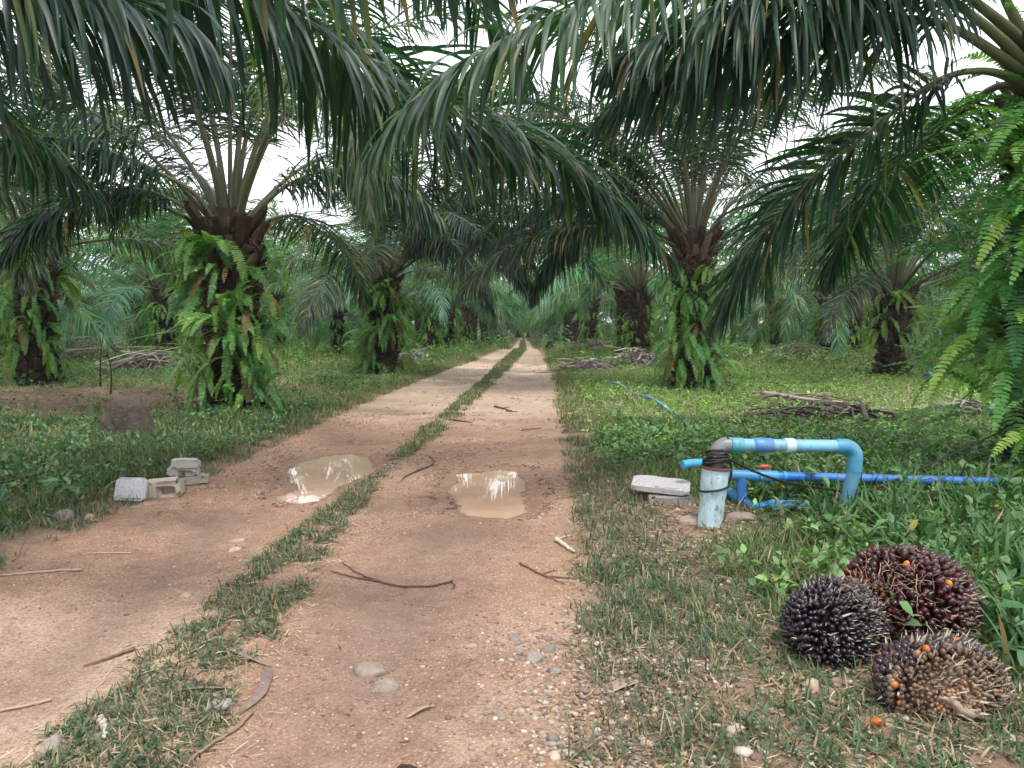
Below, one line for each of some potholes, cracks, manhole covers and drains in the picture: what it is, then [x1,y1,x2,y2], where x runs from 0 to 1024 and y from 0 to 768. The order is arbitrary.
pothole [409,462,568,529]
pothole [239,449,407,509]
